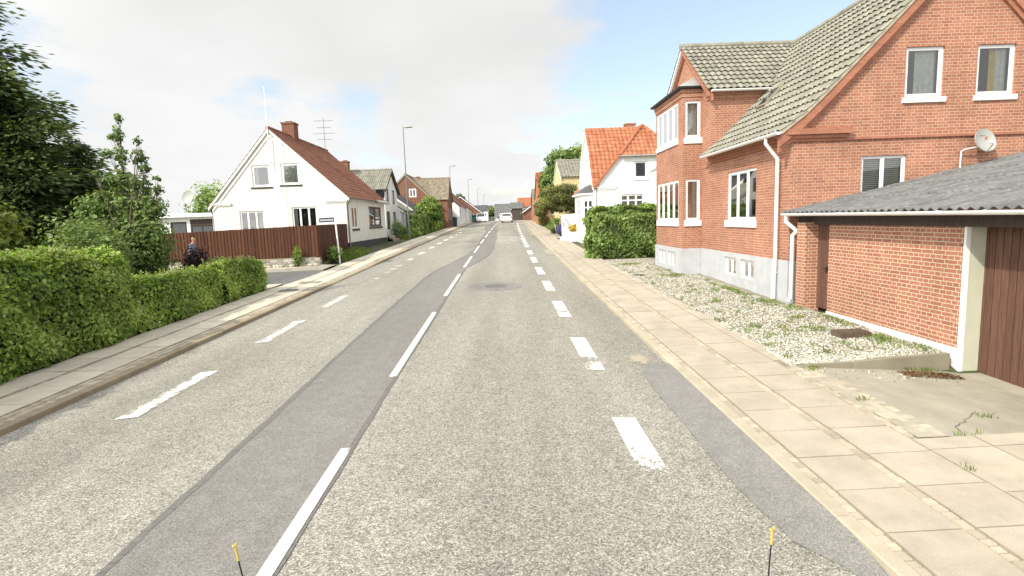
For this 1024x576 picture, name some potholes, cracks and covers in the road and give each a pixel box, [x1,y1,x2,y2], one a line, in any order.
manhole cover [468,282,523,290]
